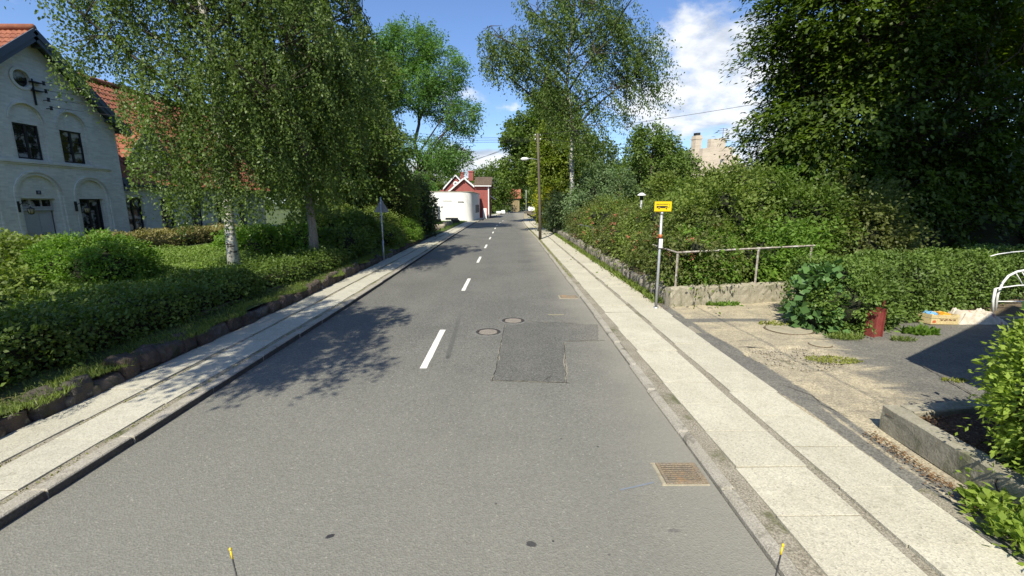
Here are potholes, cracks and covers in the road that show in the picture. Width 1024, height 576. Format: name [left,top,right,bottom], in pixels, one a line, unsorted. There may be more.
drain grate [650,462,710,486]
manhole cover [763,324,815,335]
manhole cover [472,328,503,337]
manhole cover [498,317,528,325]
